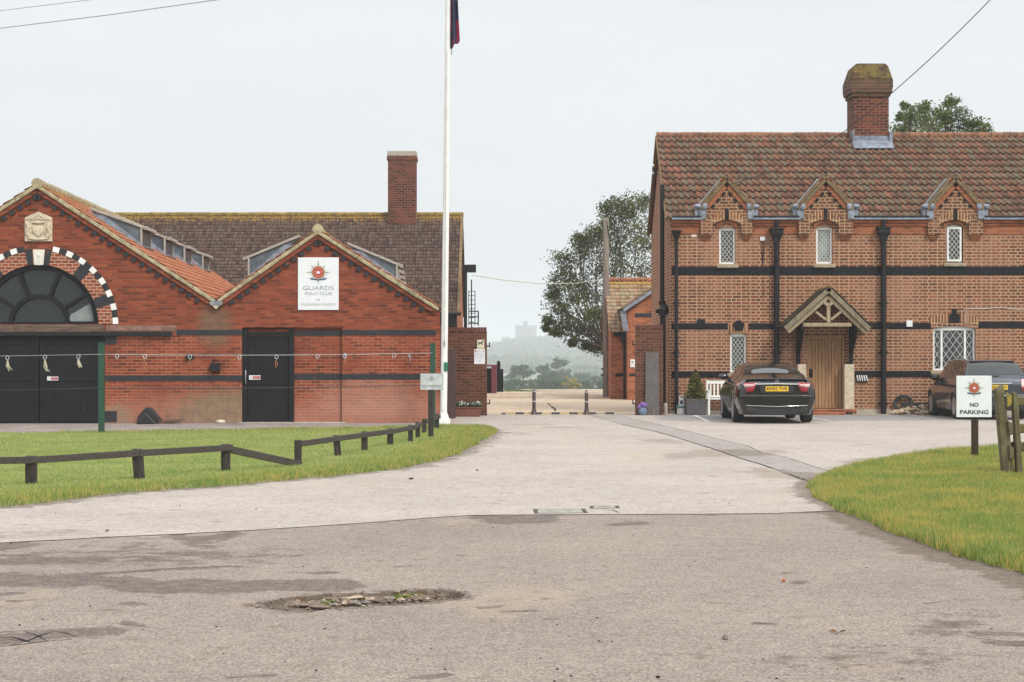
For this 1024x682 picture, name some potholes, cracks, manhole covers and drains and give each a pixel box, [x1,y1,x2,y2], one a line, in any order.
crack [0,630,77,647]
pothole [249,587,471,612]
